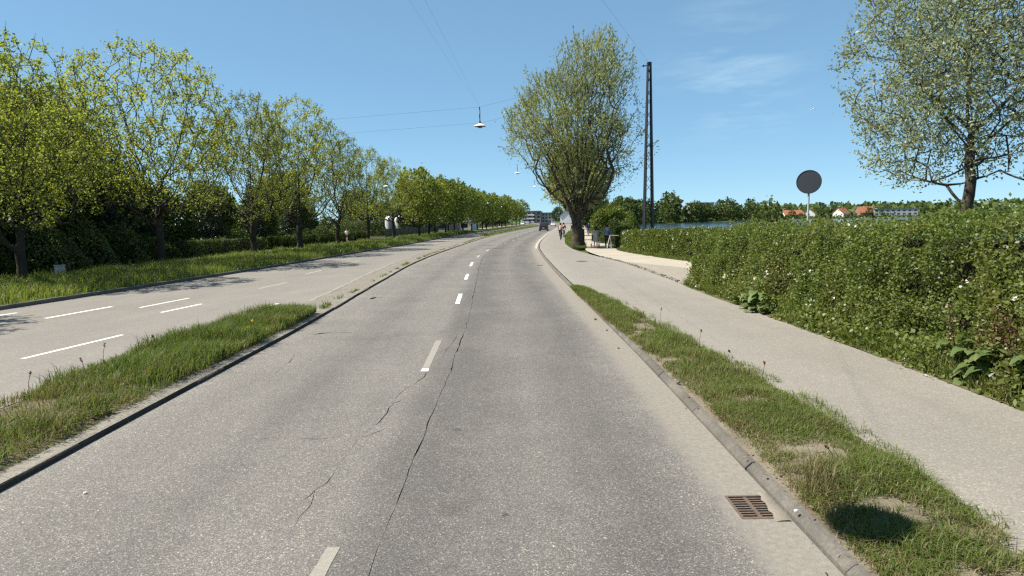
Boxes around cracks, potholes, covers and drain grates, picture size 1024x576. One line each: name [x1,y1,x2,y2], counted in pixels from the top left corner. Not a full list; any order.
crack [247,250,491,575]
drain grate [725,492,792,522]
